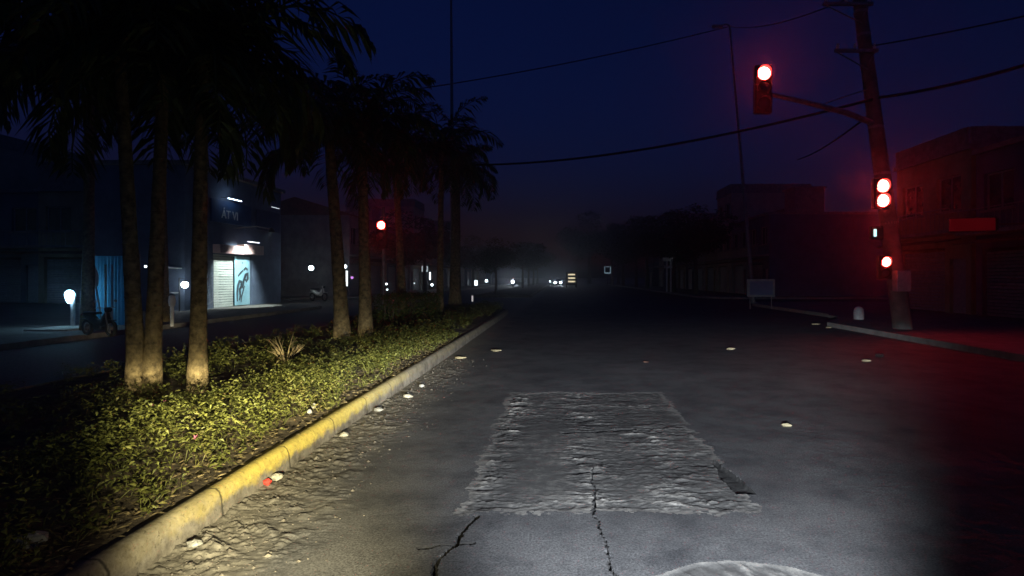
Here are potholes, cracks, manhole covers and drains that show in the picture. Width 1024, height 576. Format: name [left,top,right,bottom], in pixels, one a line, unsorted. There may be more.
crack [590,467,619,576]
crack [416,514,480,576]
pothole [713,460,756,495]
